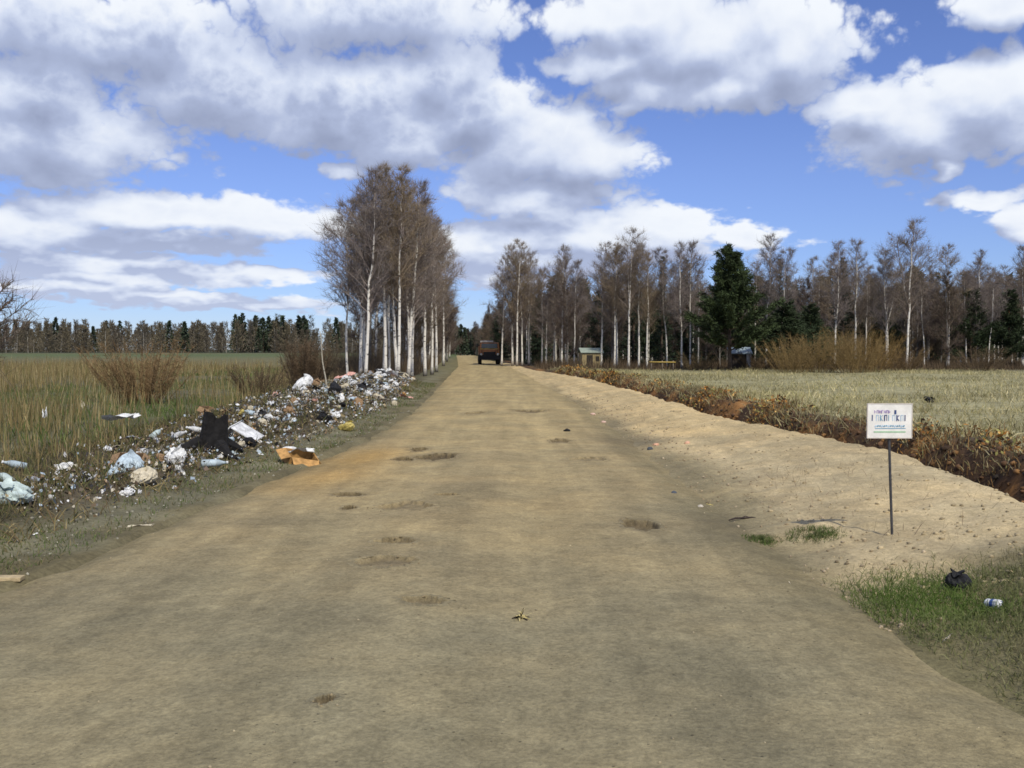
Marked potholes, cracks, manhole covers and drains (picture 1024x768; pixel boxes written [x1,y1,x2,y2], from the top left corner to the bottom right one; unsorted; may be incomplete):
pothole [366,536,422,545]
pothole [411,453,461,461]
pothole [347,554,426,569]
pothole [615,518,665,533]
pothole [391,594,457,607]
pothole [364,500,440,511]
pothole [304,692,347,708]
